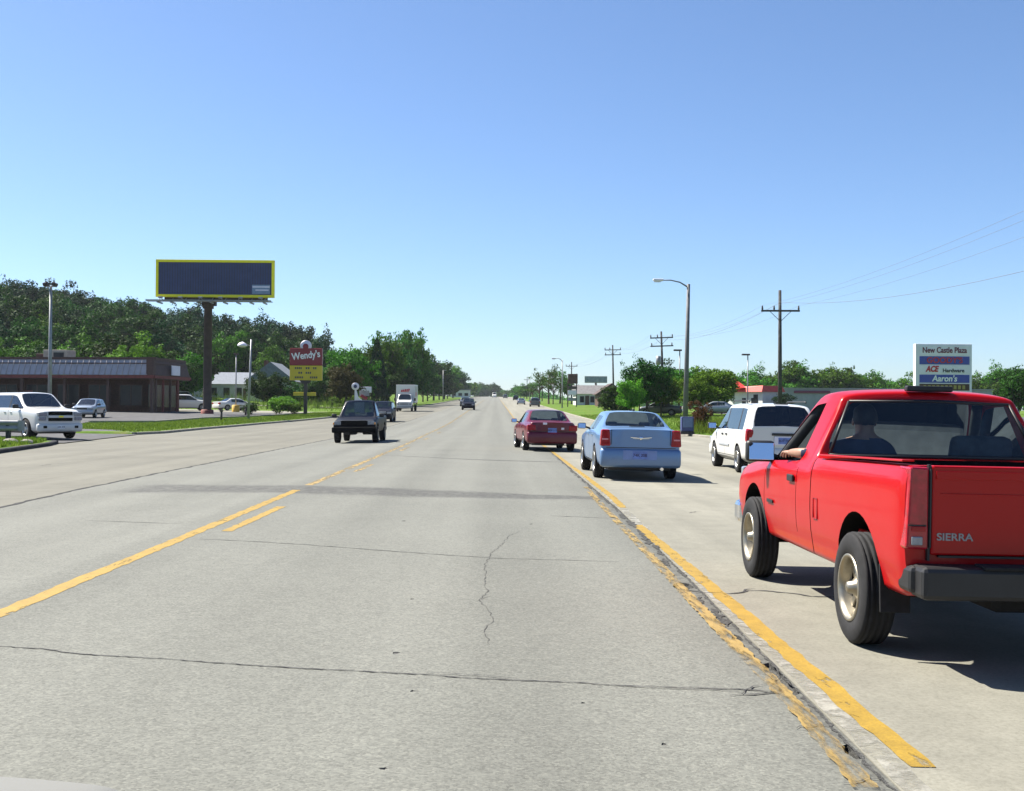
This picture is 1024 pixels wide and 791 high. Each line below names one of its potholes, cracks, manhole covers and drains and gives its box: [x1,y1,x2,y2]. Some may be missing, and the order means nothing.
crack [6,453,918,791]
